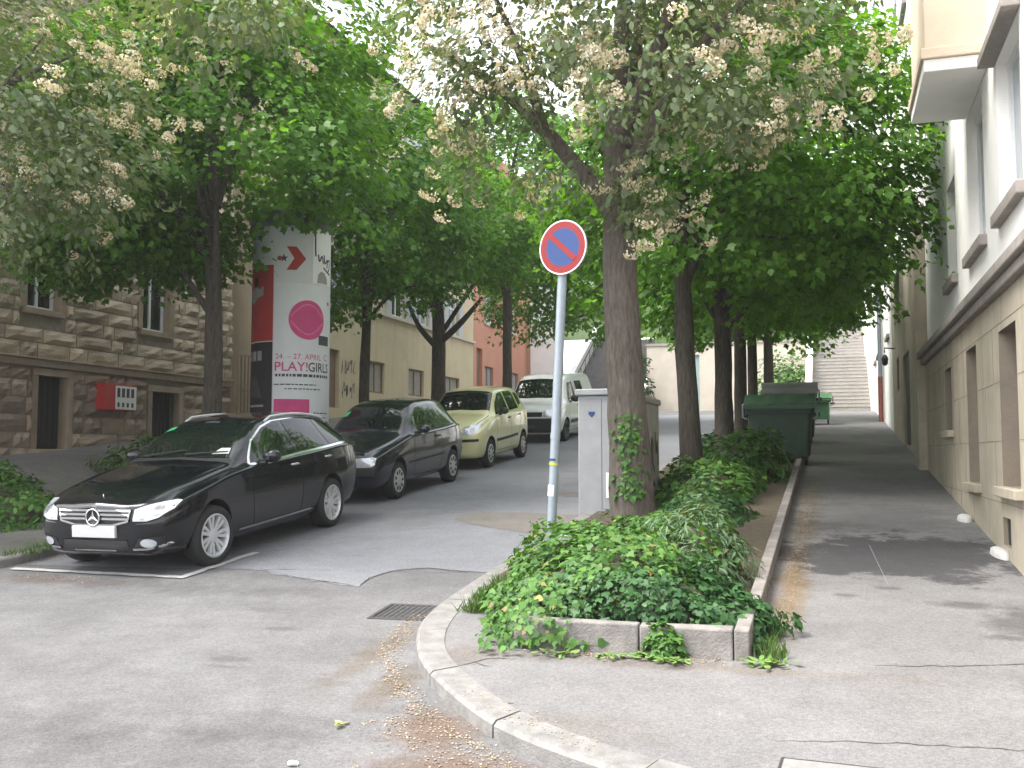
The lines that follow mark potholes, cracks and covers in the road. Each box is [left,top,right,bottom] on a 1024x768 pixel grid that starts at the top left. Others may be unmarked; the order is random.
crack [774,740,1024,751]
manhole cover [778,757,880,768]
